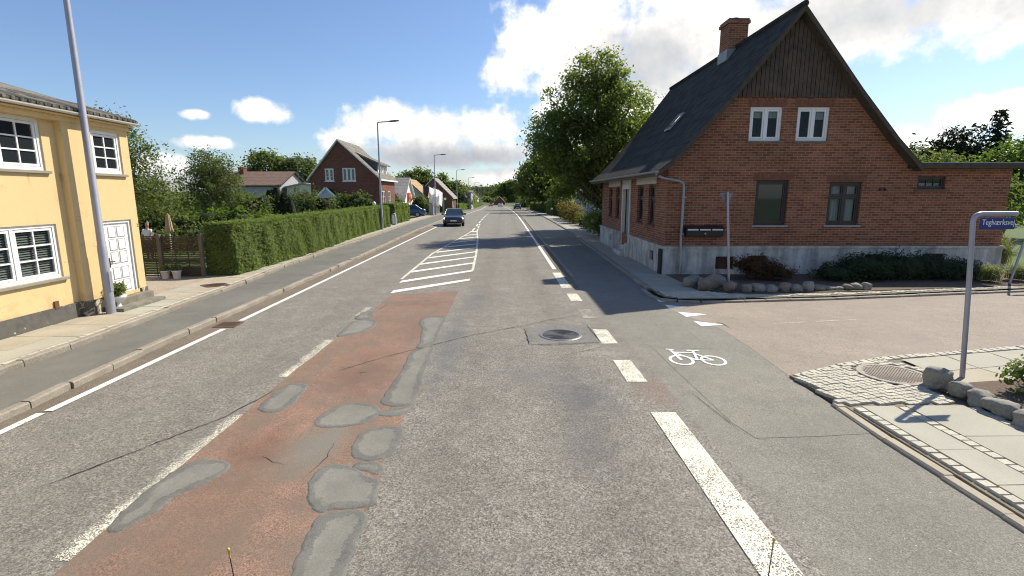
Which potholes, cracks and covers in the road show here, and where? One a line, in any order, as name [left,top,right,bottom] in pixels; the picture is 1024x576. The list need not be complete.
crack [339,315,574,375]
manhole cover [539,329,582,341]
crack [31,381,302,491]
manhole cover [855,364,923,386]
